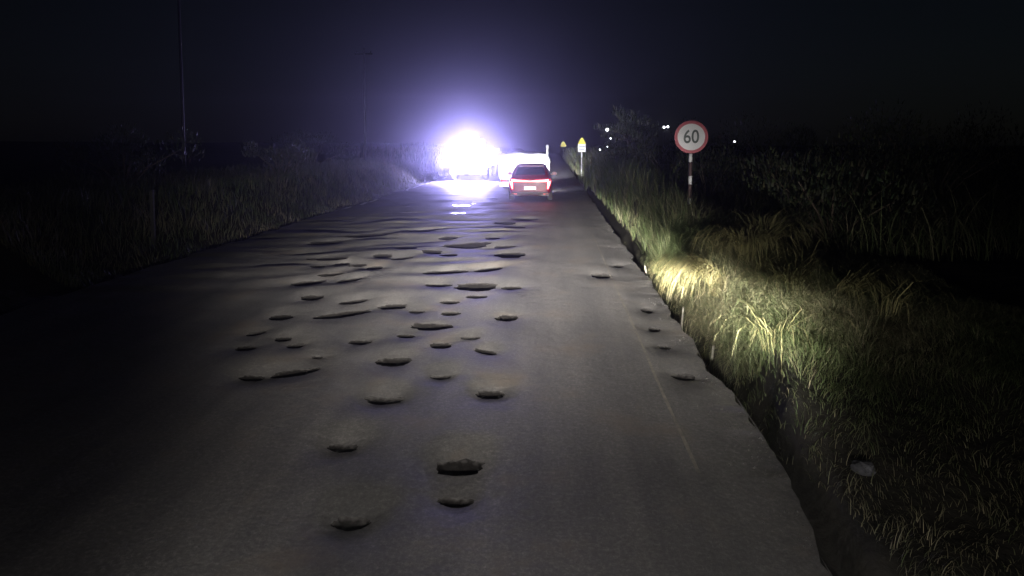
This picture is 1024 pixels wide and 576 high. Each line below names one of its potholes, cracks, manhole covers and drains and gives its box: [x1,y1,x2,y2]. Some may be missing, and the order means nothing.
pothole [330,516,371,531]
pothole [327,444,358,453]
pothole [475,390,505,399]
pothole [437,497,474,508]
pothole [364,396,406,405]
pothole [436,458,485,476]
pothole [454,283,498,291]
pothole [410,323,453,331]
pothole [271,367,321,378]
pothole [375,358,412,367]
pothole [313,309,371,319]
